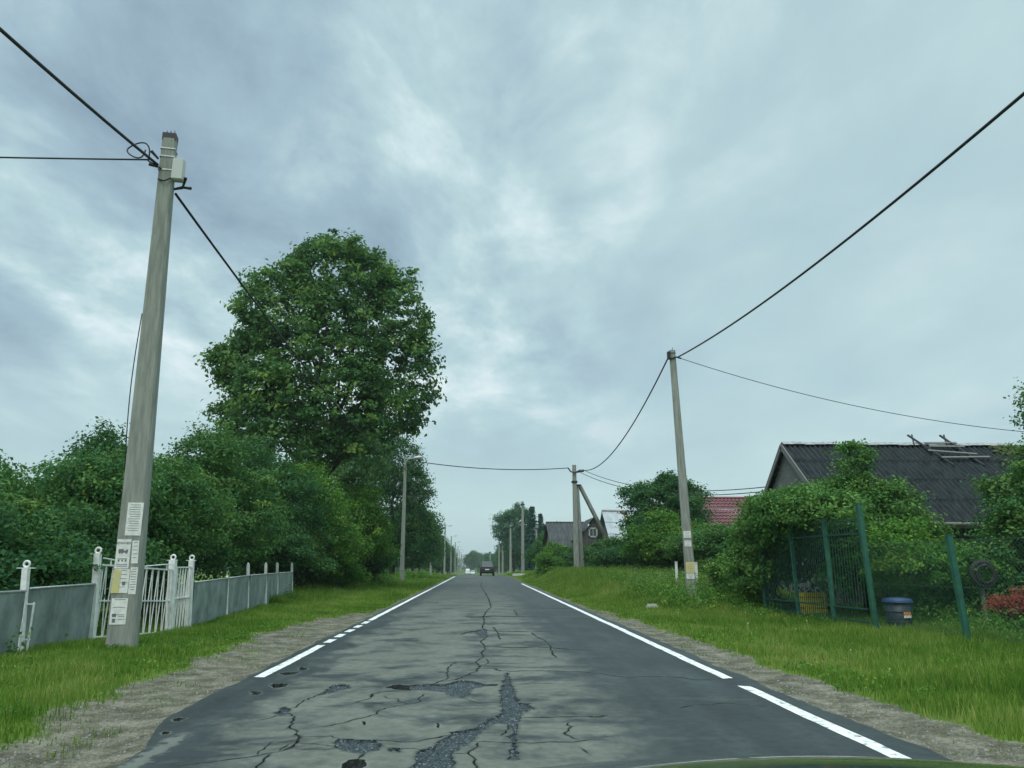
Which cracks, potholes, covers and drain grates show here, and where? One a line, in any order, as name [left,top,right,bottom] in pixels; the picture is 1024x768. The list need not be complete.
crack [172,578,694,768]
pothole [341,759,367,768]
